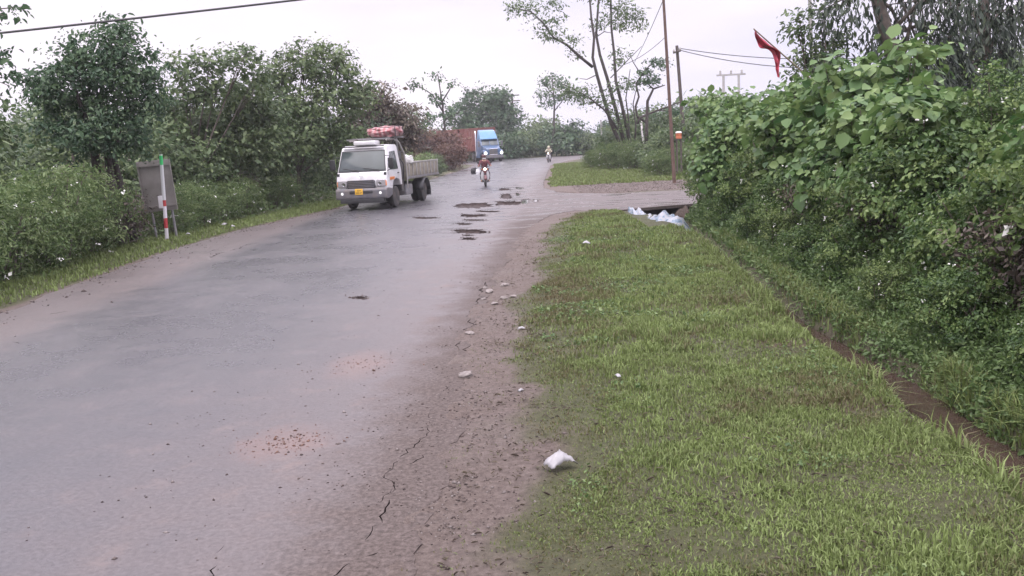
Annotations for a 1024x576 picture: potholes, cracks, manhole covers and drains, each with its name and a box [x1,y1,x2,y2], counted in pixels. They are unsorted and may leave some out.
crack [366,428,430,556]
